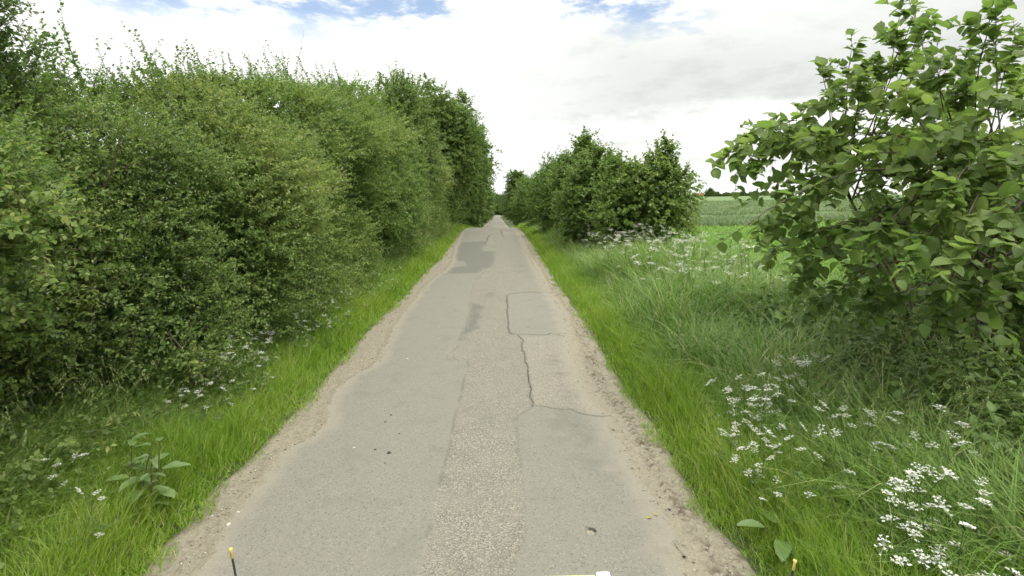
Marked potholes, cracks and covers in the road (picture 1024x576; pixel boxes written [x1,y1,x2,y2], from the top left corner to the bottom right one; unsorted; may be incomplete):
crack [504,291,612,418]
